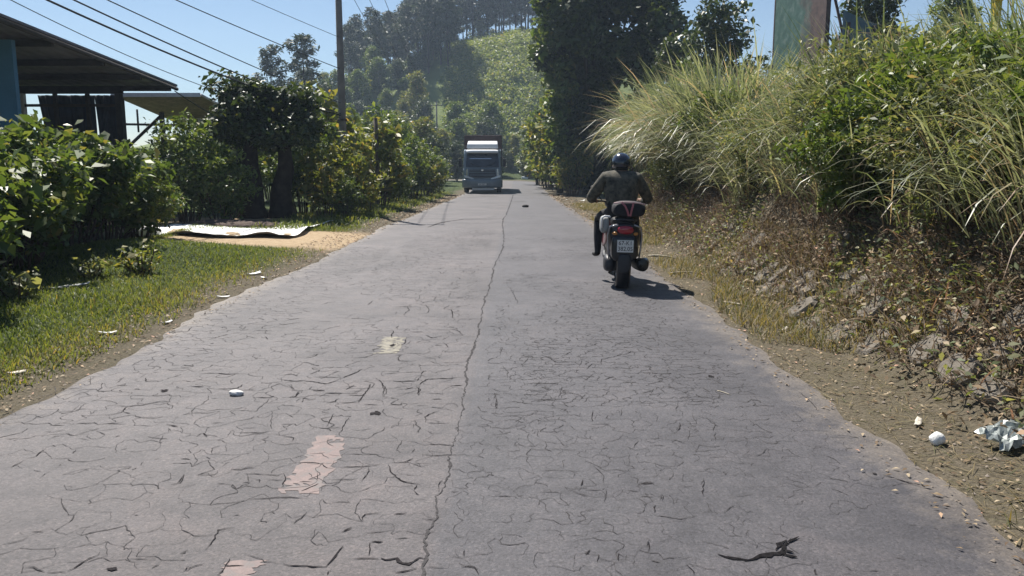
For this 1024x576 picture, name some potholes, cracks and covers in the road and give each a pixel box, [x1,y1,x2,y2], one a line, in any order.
crack [0,231,950,576]
